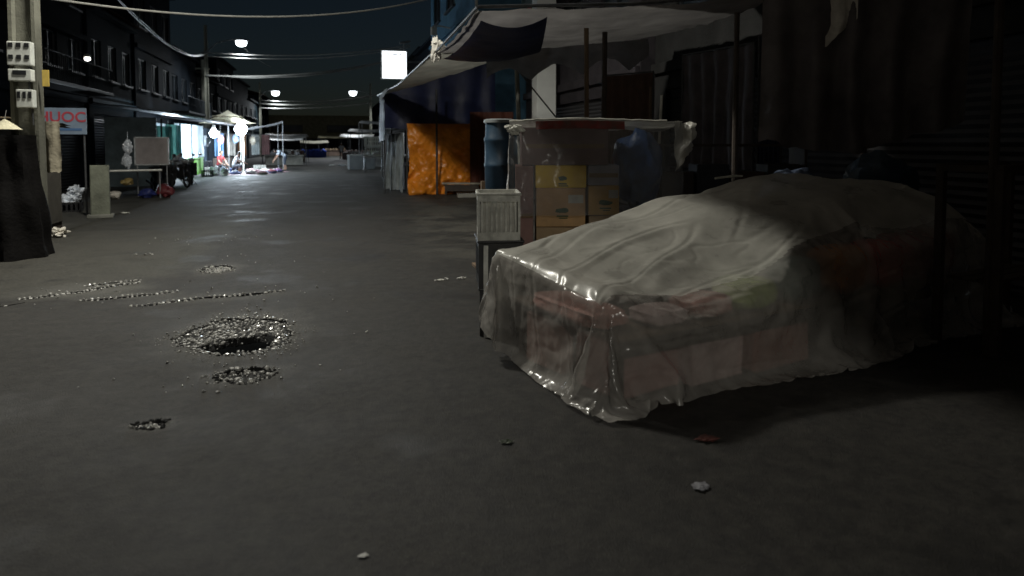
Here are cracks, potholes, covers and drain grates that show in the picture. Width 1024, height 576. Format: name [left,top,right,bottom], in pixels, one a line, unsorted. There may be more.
pothole [155,312,314,365]
pothole [204,365,283,385]
crack [0,279,286,307]
pothole [198,264,236,274]
pothole [128,418,171,430]
